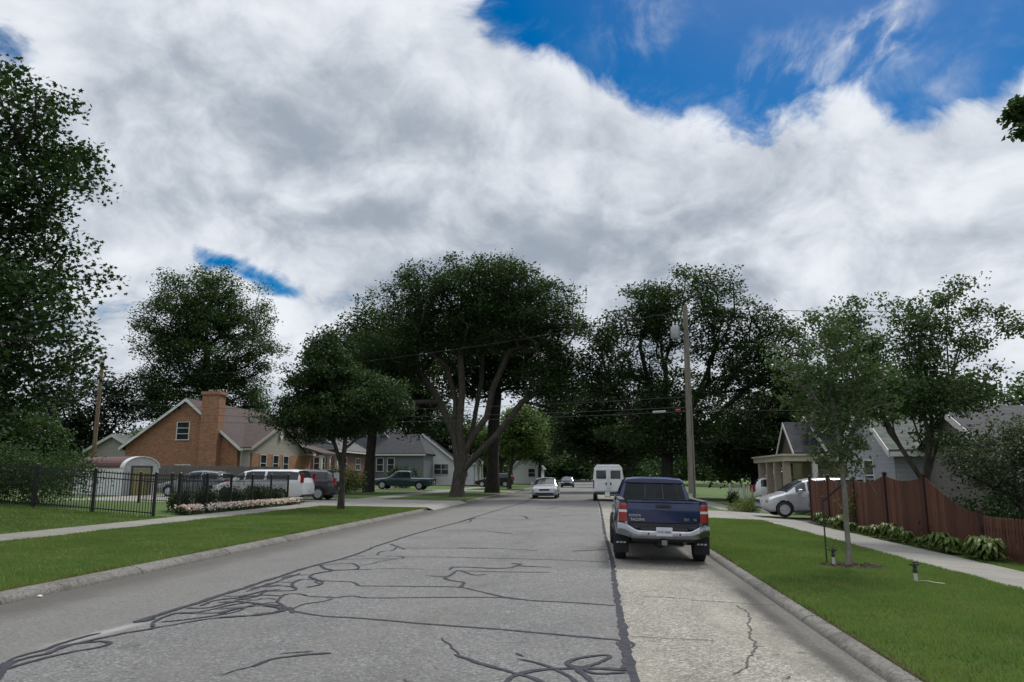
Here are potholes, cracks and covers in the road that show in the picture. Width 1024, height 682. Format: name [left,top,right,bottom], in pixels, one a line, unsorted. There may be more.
crack [647,596,778,674]
